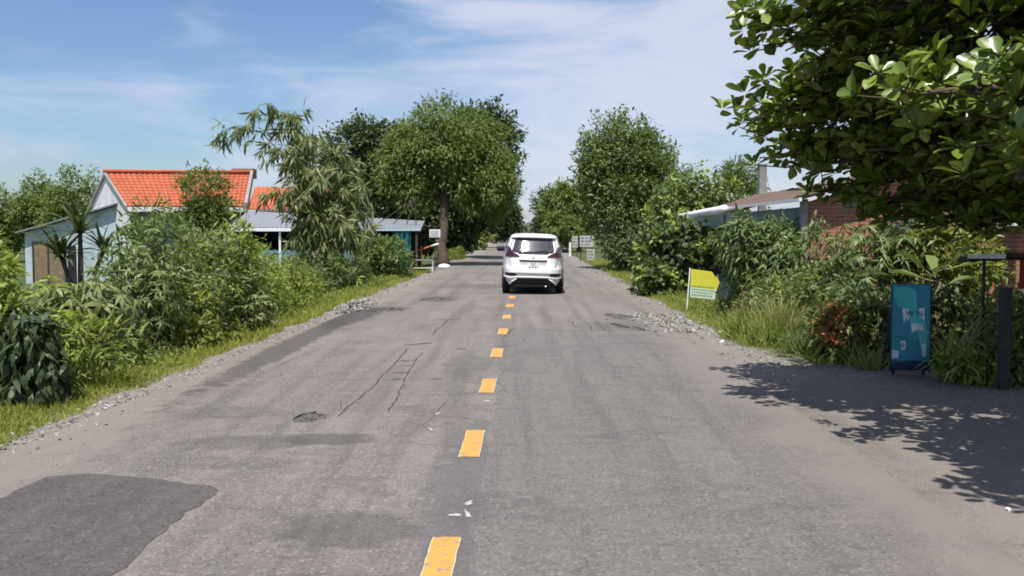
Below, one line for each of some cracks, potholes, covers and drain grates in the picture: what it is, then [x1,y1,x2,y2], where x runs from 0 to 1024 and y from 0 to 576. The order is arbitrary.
pothole [293,411,327,423]
crack [337,319,476,431]
